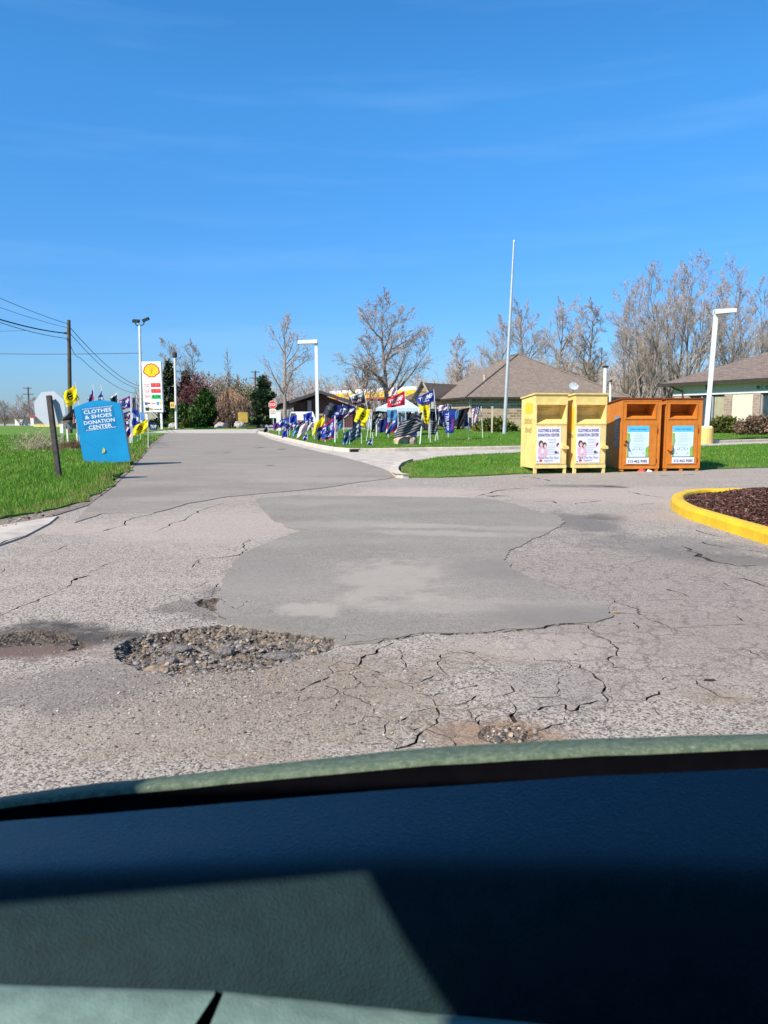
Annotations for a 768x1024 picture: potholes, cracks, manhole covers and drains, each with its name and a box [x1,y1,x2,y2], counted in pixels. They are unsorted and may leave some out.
pothole [112,625,336,675]
crack [170,538,258,620]
crack [0,559,130,616]
crack [104,505,216,531]
pothole [67,639,87,651]
pothole [478,723,543,744]
crack [614,601,767,676]
pothole [0,630,77,649]
crack [682,530,767,587]
crack [300,623,765,750]
